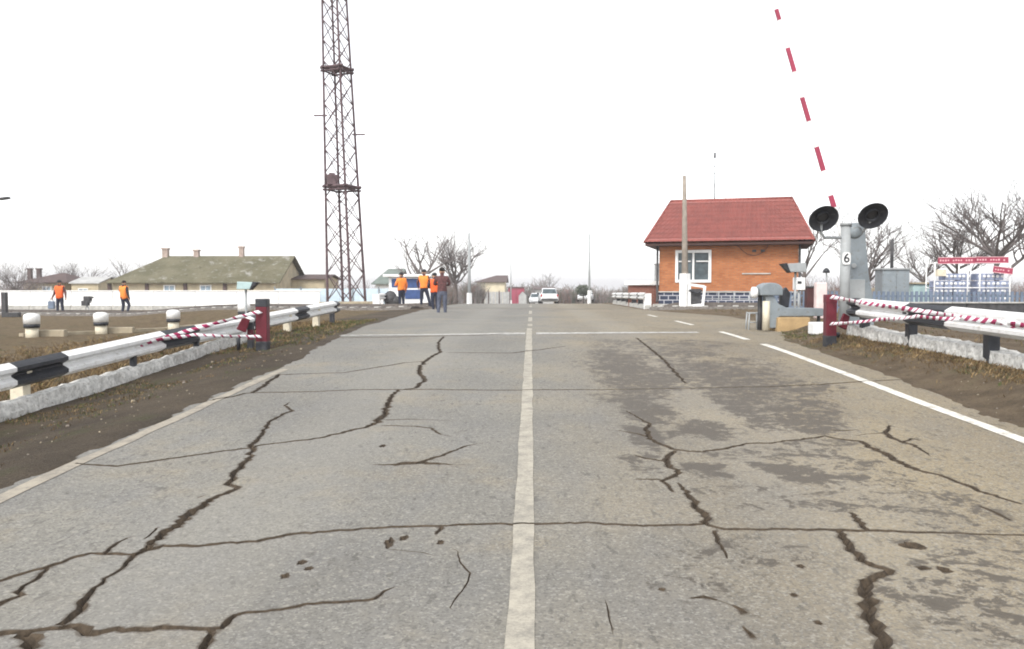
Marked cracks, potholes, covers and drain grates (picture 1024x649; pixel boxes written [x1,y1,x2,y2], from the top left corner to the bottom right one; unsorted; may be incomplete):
crack [0,337,1024,649]
pothole [898,542,927,550]
